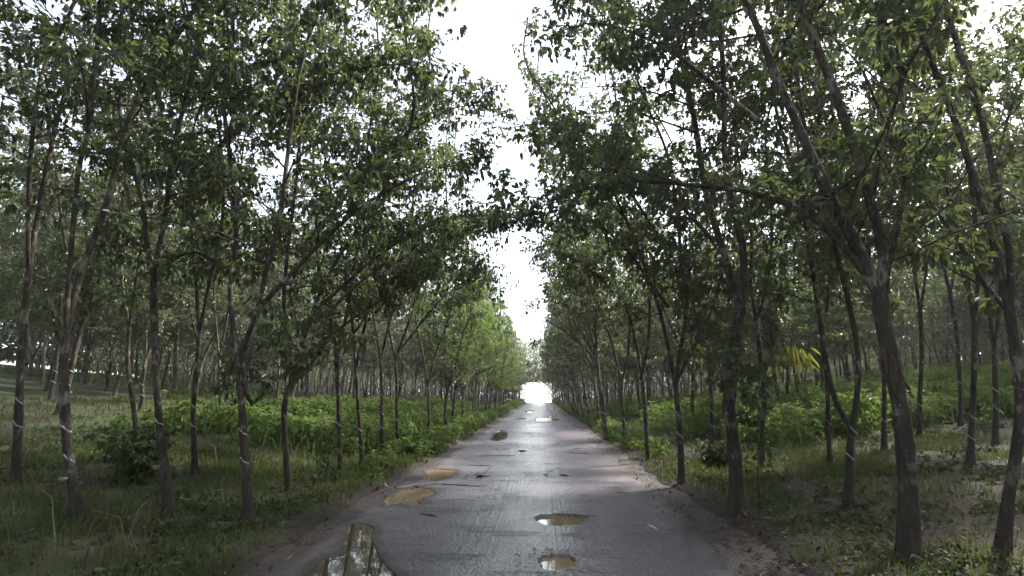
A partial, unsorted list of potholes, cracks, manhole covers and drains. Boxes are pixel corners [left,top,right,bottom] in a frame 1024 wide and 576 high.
pothole [491,430,508,441]
pothole [534,513,590,526]
pothole [309,522,397,576]
pothole [425,469,457,480]
pothole [537,554,577,570]
crack [409,455,516,489]
pothole [383,487,436,506]
